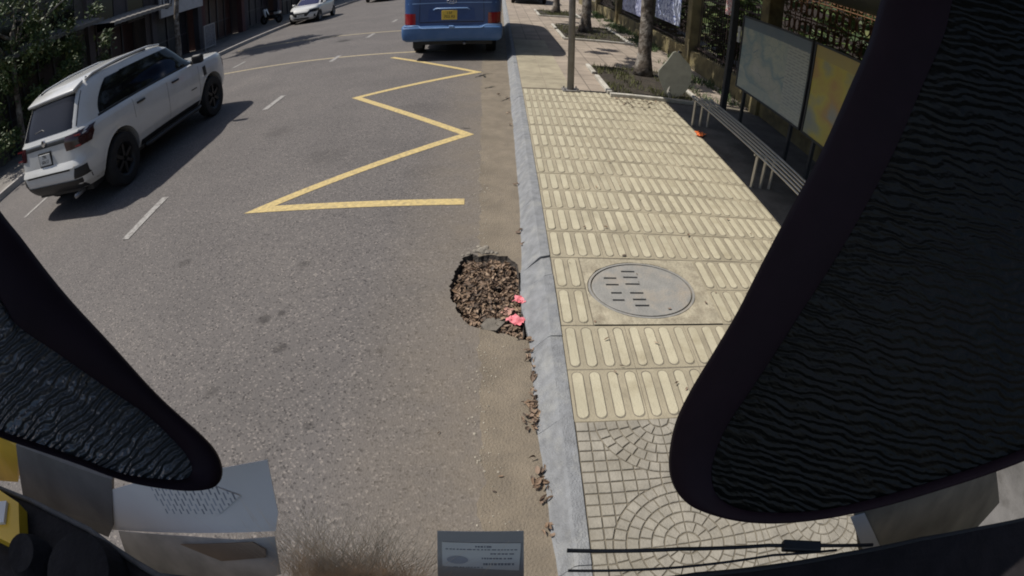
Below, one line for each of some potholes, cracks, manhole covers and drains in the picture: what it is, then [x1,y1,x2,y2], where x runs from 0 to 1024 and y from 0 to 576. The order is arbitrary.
manhole cover [579,258,722,324]
pothole [449,245,524,340]
